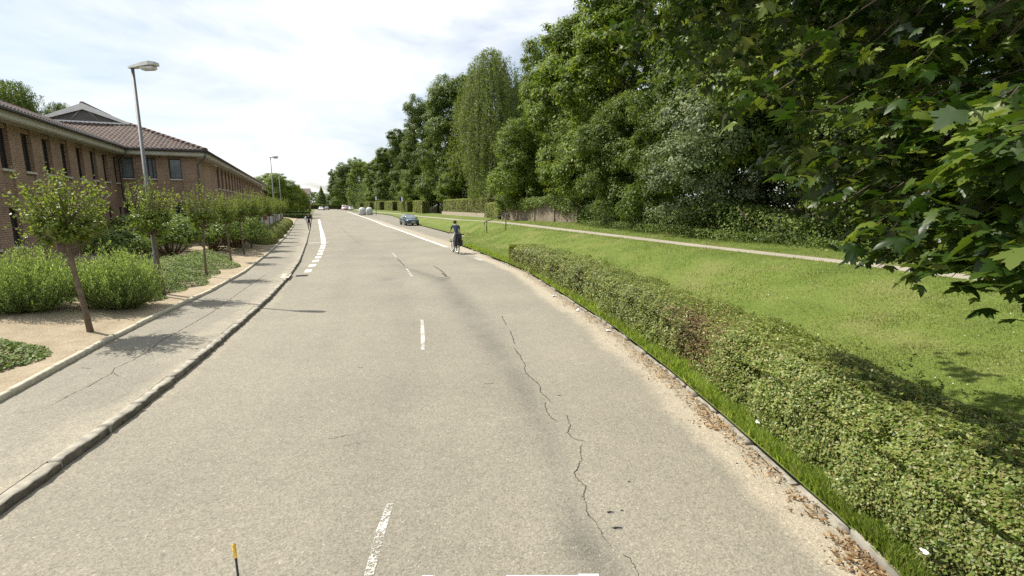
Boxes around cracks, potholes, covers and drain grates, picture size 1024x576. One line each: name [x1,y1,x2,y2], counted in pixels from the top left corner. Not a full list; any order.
crack [14,275,265,413]
crack [502,316,638,573]
